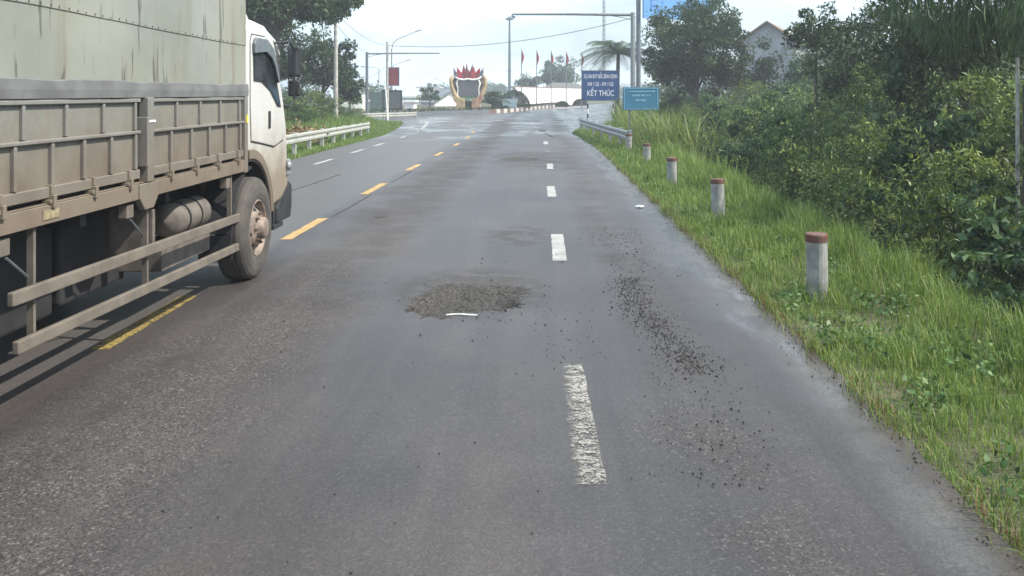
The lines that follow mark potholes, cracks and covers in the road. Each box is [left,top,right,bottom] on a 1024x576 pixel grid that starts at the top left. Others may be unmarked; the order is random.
pothole [404,283,533,320]
